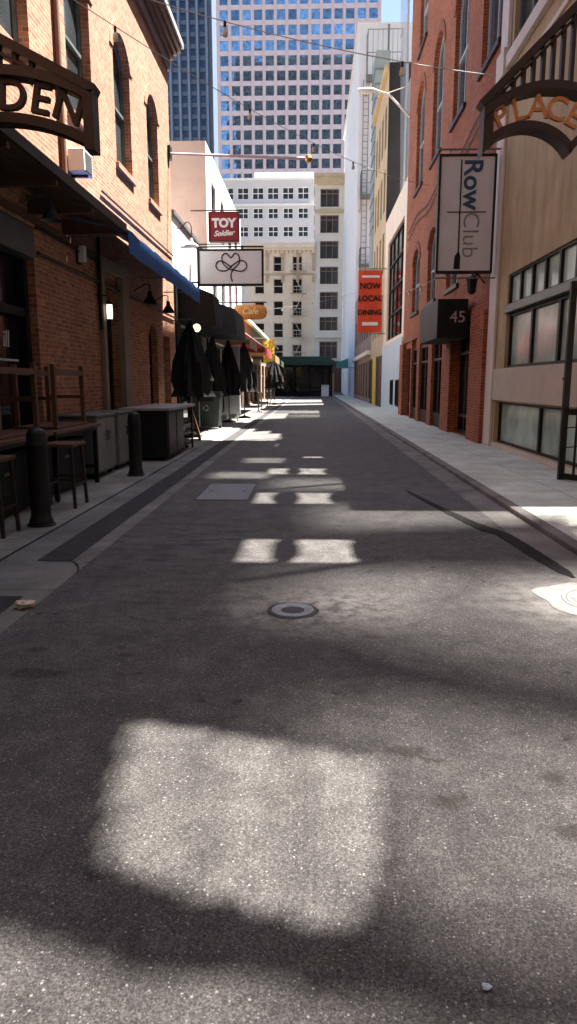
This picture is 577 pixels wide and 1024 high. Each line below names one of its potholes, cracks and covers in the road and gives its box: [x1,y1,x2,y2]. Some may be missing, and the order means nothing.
utility cover [193,484,258,500]
manhole cover [531,582,577,615]
manhole cover [267,602,319,619]
